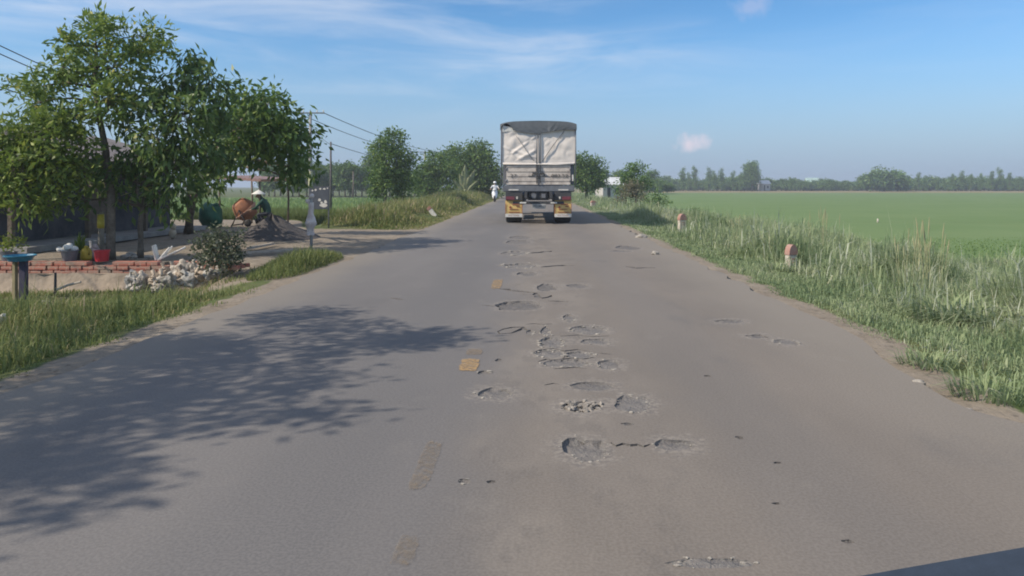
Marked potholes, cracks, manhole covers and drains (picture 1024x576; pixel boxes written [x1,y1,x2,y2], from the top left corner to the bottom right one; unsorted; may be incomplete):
pothole [560,351,597,359]
pothole [473,387,513,399]
pothole [558,435,609,463]
pothole [530,349,568,358]
pothole [652,439,693,450]
pothole [666,556,760,569]
pothole [568,324,611,335]
pothole [539,359,597,368]
pothole [570,382,614,391]
pothole [559,399,604,412]
pothole [614,393,651,413]
pothole [495,301,542,310]
